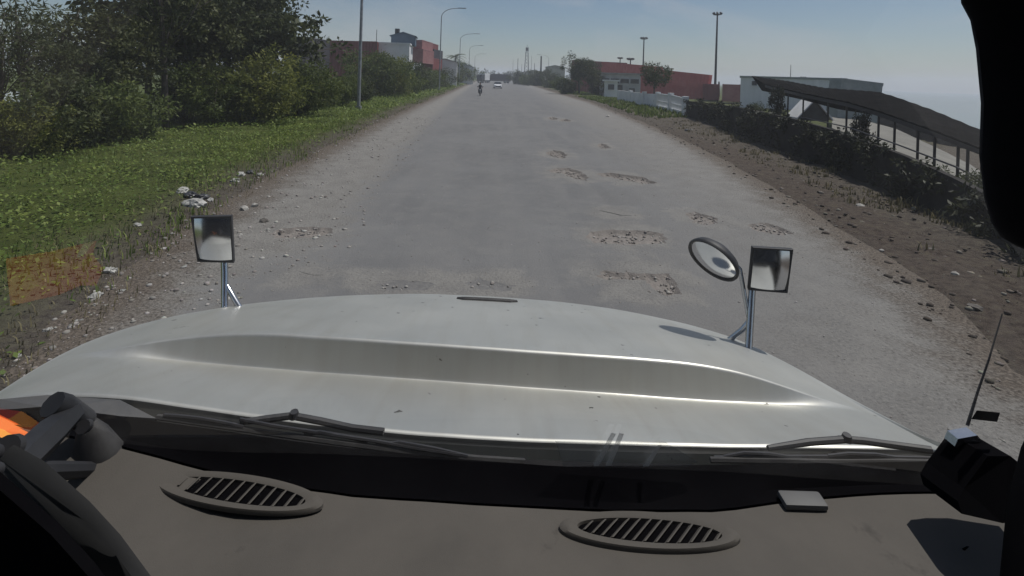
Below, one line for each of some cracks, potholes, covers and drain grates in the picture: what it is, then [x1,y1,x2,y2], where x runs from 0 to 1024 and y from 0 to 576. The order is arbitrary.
pothole [748,223,794,236]
pothole [271,227,333,239]
pothole [597,270,682,296]
pothole [586,229,667,245]
pothole [548,168,589,181]
pothole [686,211,718,225]
pothole [598,173,657,184]
pothole [546,150,567,159]
